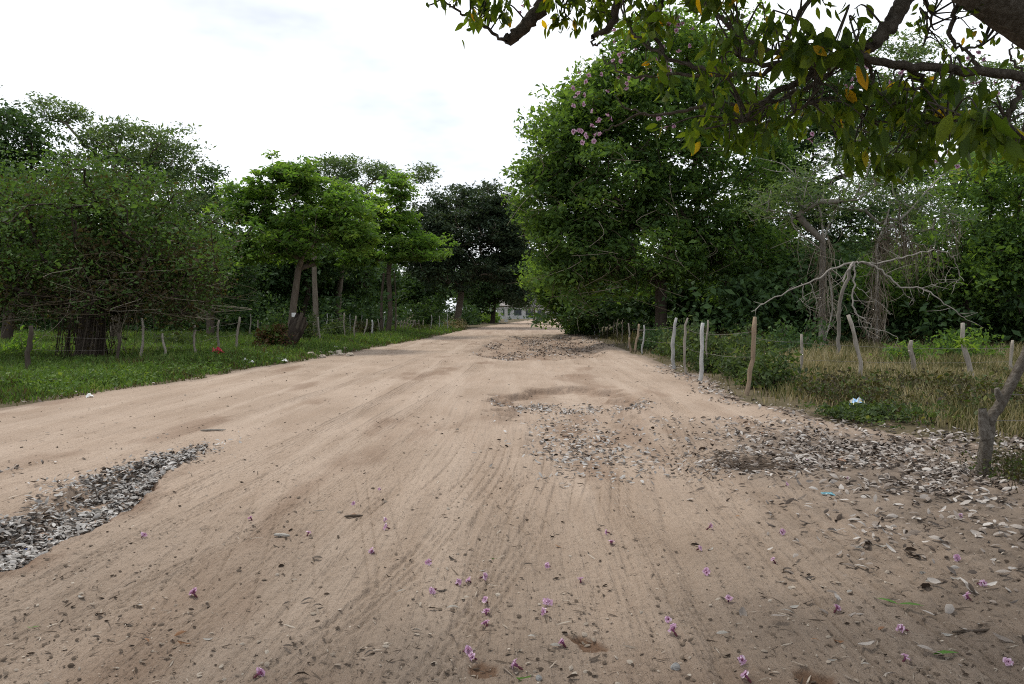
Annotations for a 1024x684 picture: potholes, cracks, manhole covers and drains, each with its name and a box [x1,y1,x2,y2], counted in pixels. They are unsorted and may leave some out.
pothole [482,385,656,501]
pothole [725,454,786,474]
pothole [462,334,618,361]
pothole [0,451,201,571]
